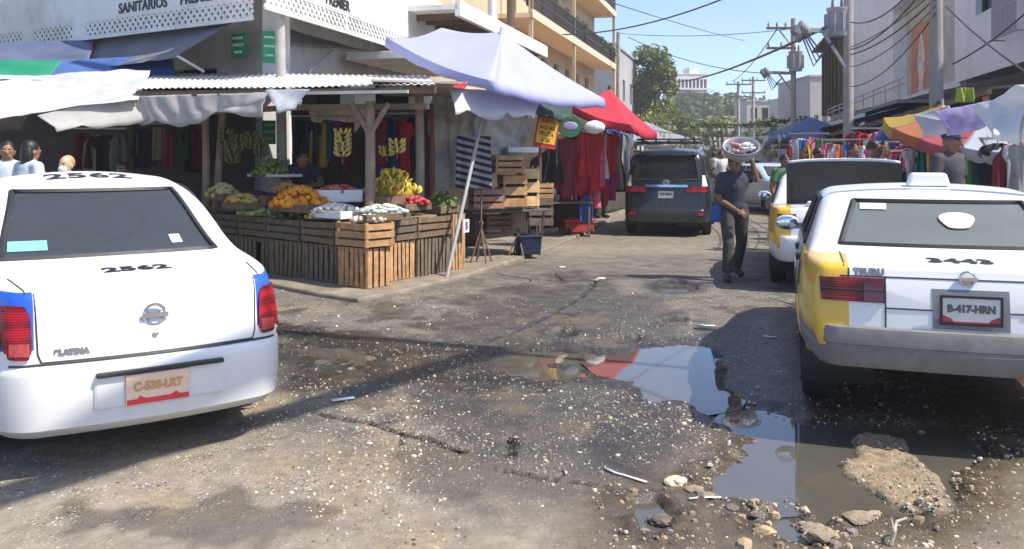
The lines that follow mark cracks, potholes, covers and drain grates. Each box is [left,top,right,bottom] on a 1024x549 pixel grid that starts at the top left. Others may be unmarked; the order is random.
crack [486,273,600,342]
pothole [739,501,821,547]
crack [314,411,470,454]
pothole [626,491,682,540]
pothole [498,427,526,459]
pothole [693,413,1002,527]
pothole [545,326,583,338]
